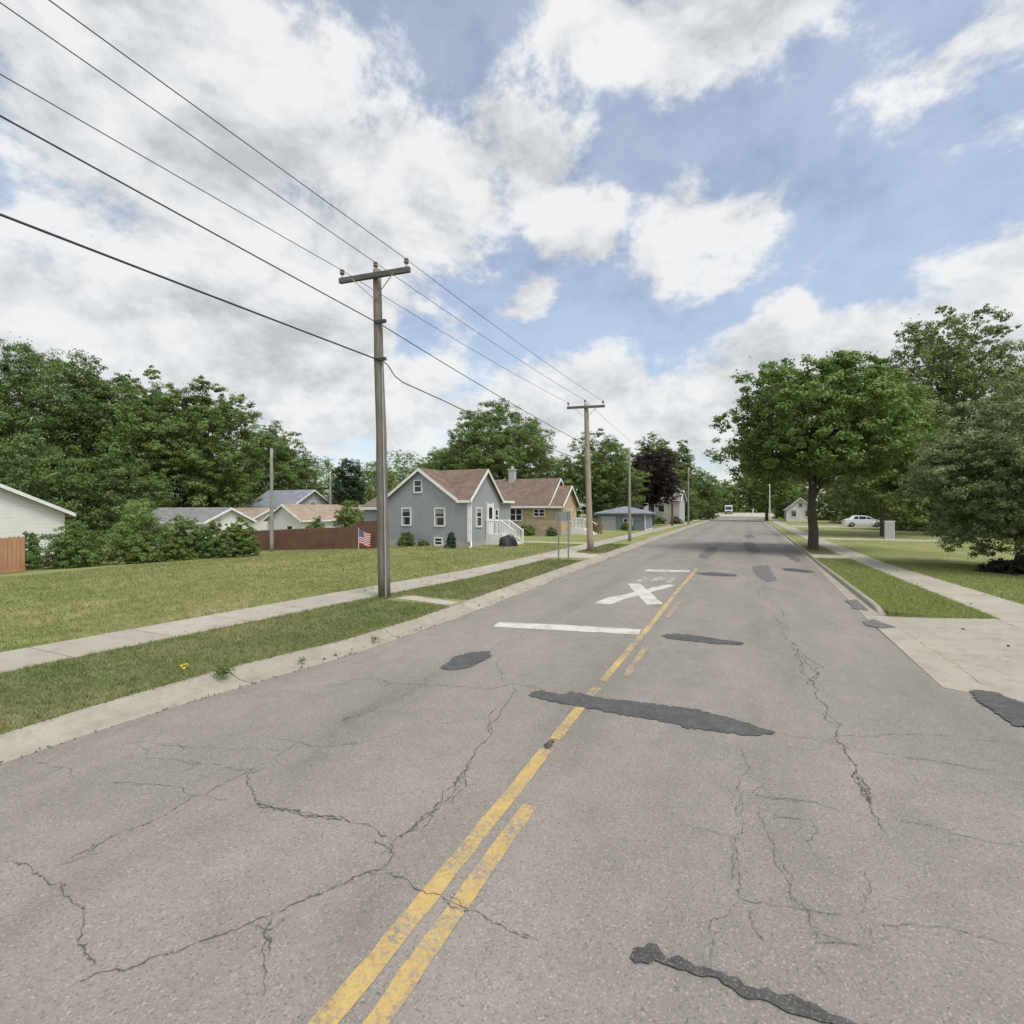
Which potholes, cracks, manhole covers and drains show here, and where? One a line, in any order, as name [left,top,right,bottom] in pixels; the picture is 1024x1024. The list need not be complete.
crack [10,619,554,993]
crack [690,748,875,976]
crack [758,584,1024,846]
